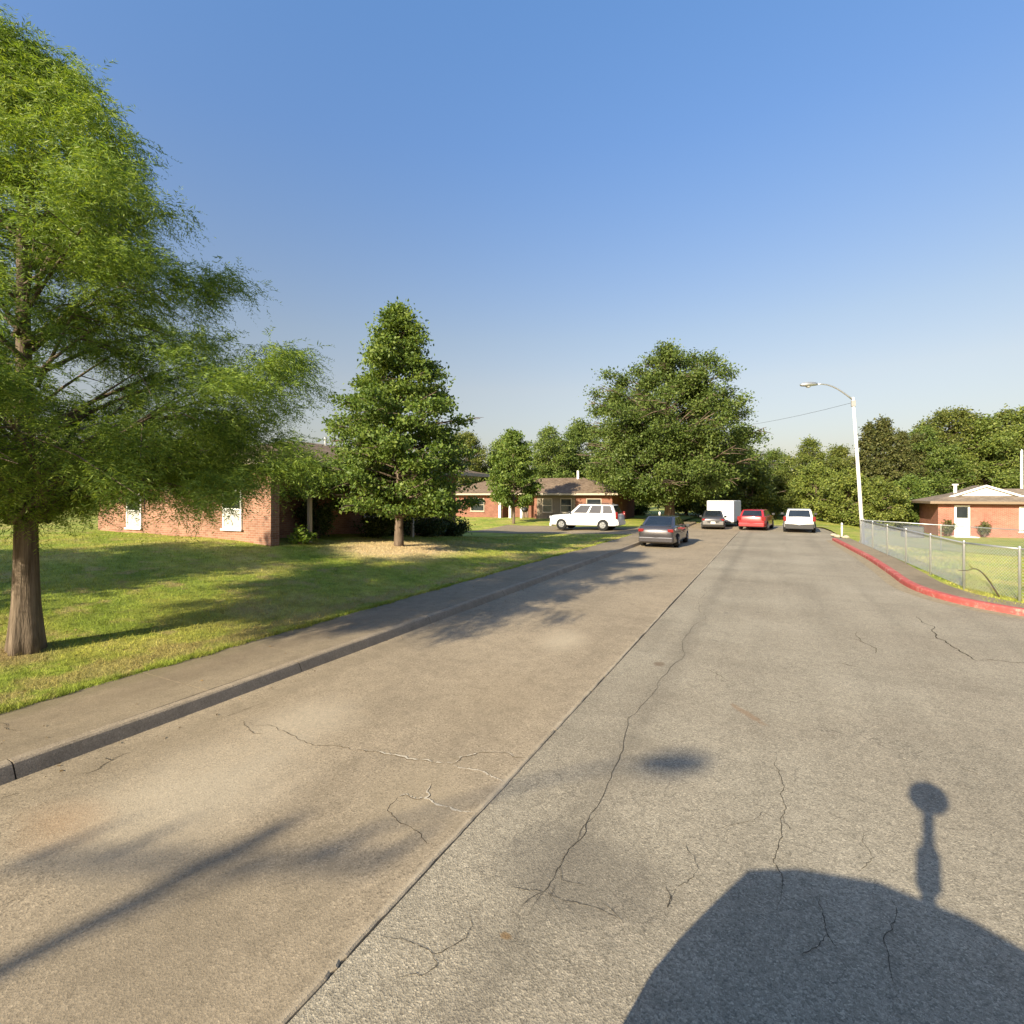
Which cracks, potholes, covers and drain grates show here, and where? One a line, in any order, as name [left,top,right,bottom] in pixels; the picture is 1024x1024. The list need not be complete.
crack [381,912,473,979]
crack [883,898,897,984]
crack [242,720,521,846]
crack [802,897,836,954]
crack [916,616,1018,663]
